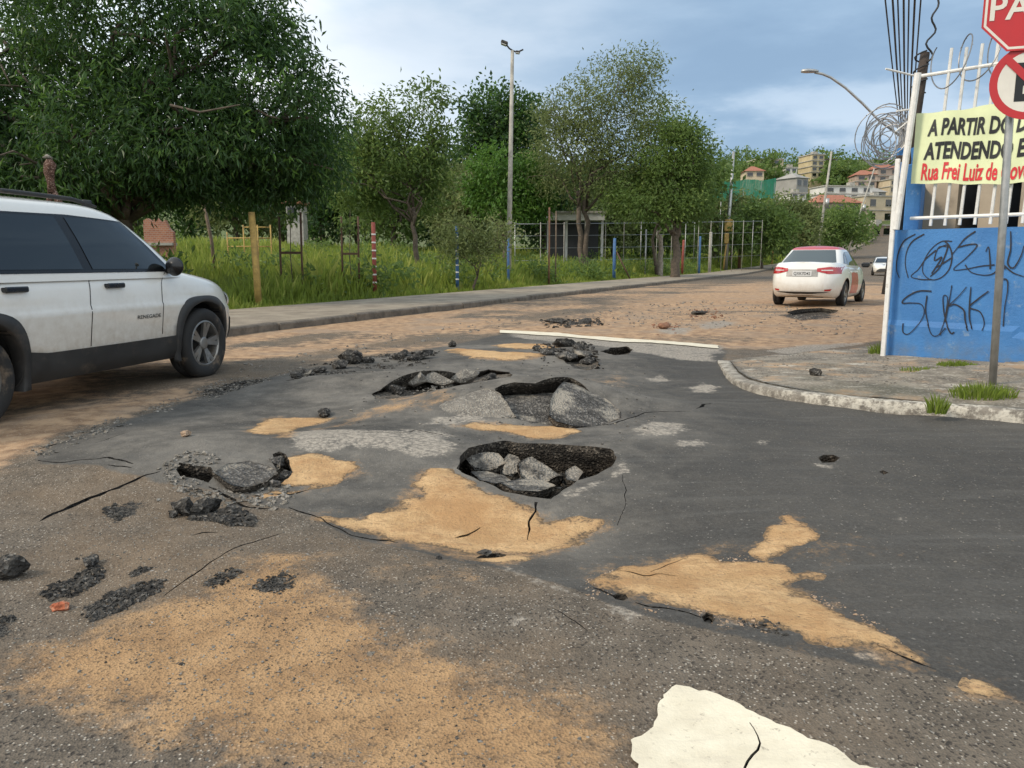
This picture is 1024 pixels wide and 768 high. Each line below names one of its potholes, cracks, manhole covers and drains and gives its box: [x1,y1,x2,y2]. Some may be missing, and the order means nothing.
pothole [372,369,513,399]
pothole [495,377,589,426]
crack [38,434,160,522]
crack [527,502,538,540]
pothole [787,308,838,316]
crack [164,487,398,596]
pothole [273,451,292,475]
pothole [456,441,617,499]
pothole [176,462,214,482]
crack [635,602,701,618]
